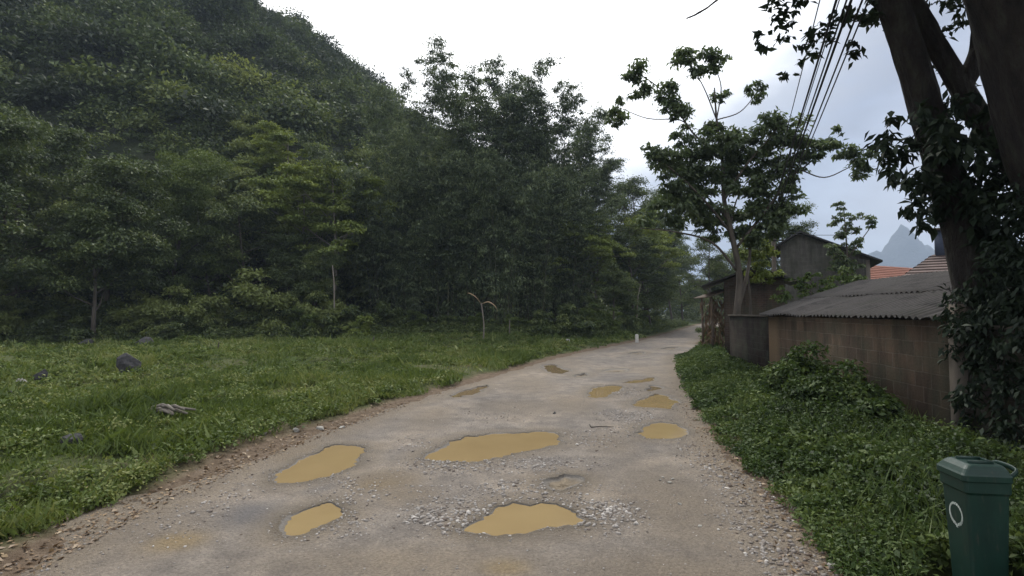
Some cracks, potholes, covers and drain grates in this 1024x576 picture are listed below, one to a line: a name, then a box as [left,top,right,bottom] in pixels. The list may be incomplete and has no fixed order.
pothole [635,422,689,439]
pothole [587,385,623,398]
pothole [541,364,571,374]
pothole [272,444,367,483]
pothole [423,431,561,462]
pothole [461,502,586,536]
pothole [448,385,489,397]
pothole [279,502,344,536]
pothole [631,394,681,409]
pothole [542,474,585,491]
